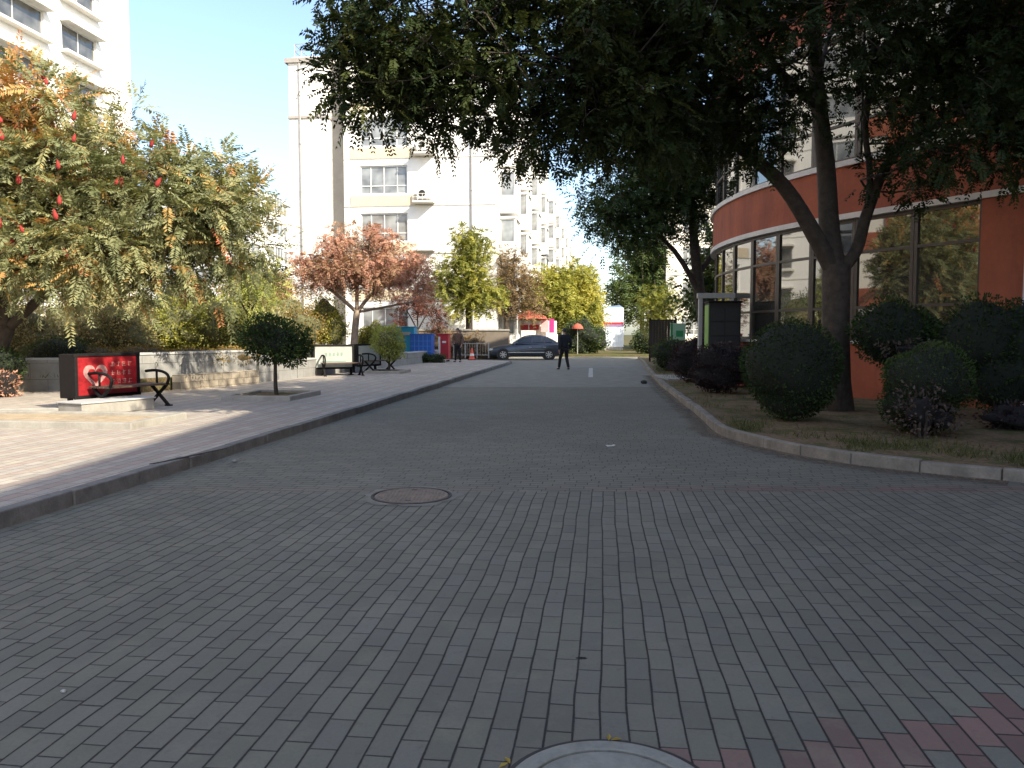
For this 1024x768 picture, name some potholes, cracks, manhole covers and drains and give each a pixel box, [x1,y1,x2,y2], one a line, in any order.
manhole cover [510,739,699,768]
manhole cover [363,486,464,506]
